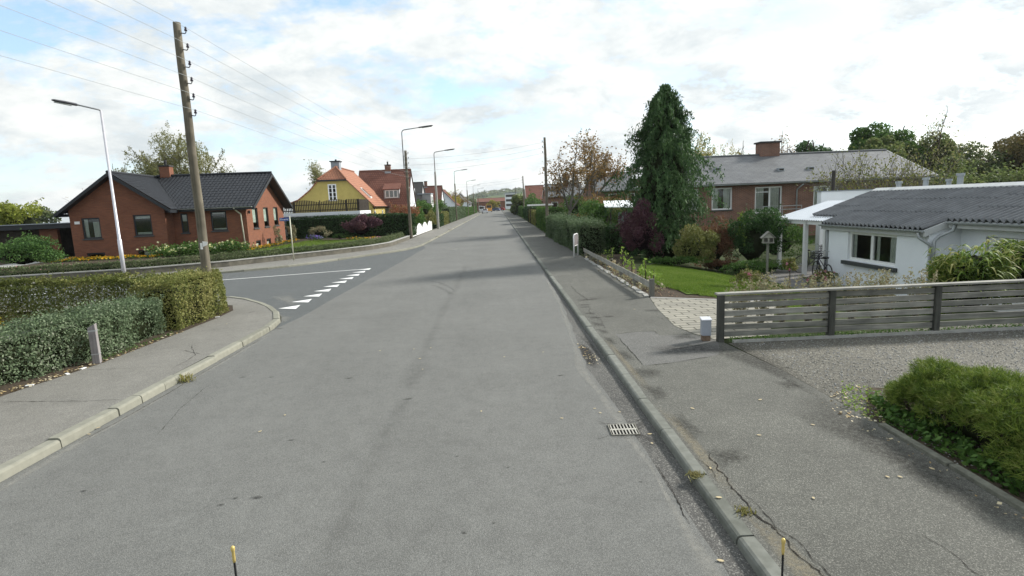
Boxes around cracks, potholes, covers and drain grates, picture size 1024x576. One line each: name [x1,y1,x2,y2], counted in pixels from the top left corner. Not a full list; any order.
crack [709,451,831,576]
crack [658,467,690,524]
drain grate [607,423,640,436]
